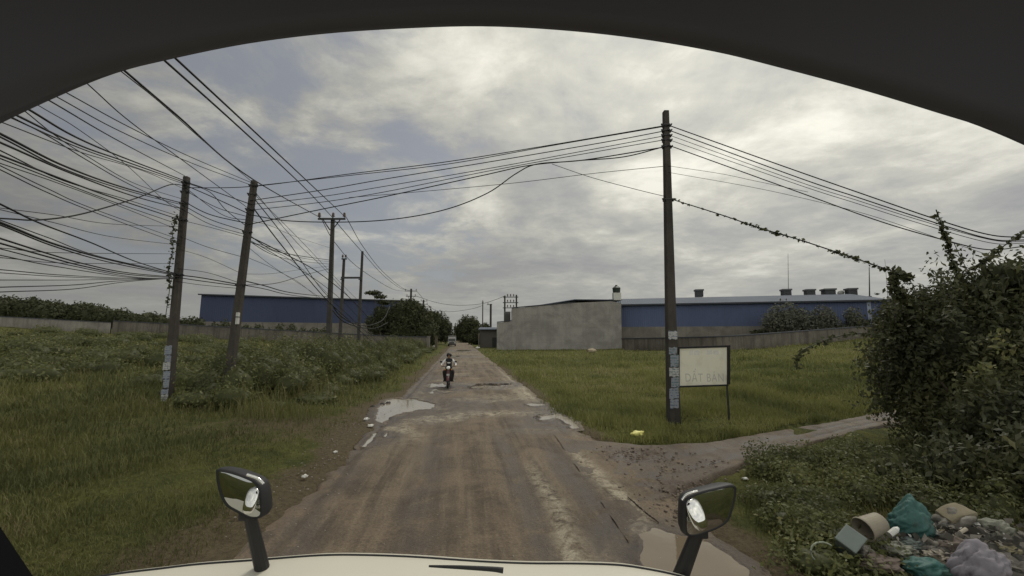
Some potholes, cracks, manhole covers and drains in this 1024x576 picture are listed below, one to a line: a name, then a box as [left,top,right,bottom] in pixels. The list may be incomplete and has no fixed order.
pothole [354,432,382,451]
crack [627,497,658,524]
pothole [624,522,772,576]
pothole [364,397,441,427]
pothole [533,413,584,432]
